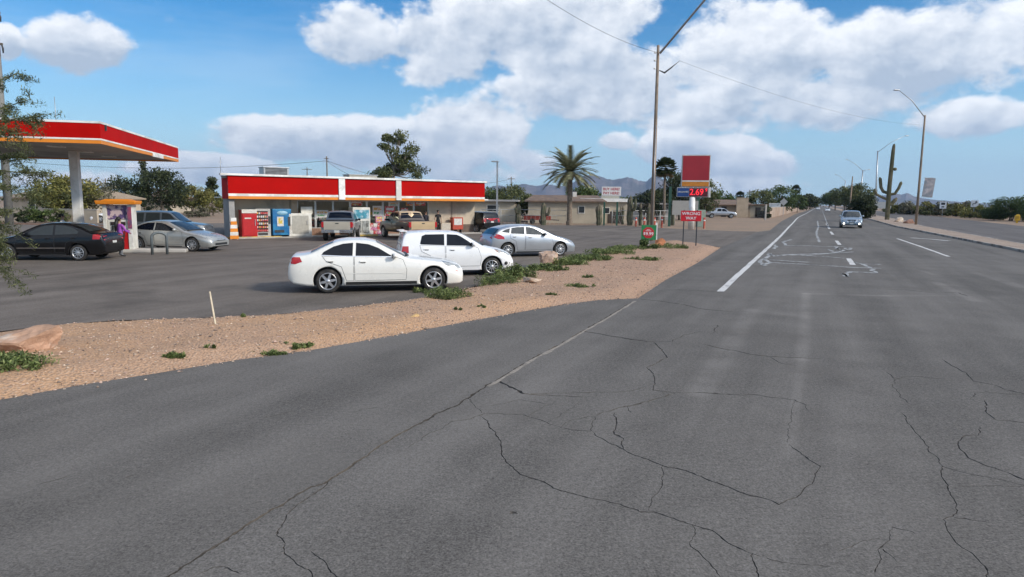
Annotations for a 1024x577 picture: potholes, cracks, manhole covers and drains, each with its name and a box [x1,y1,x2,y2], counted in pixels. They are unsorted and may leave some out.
crack [407,381,831,577]
crack [199,482,337,577]
crack [888,361,1024,577]
crack [708,345,819,365]
crack [839,527,914,572]
